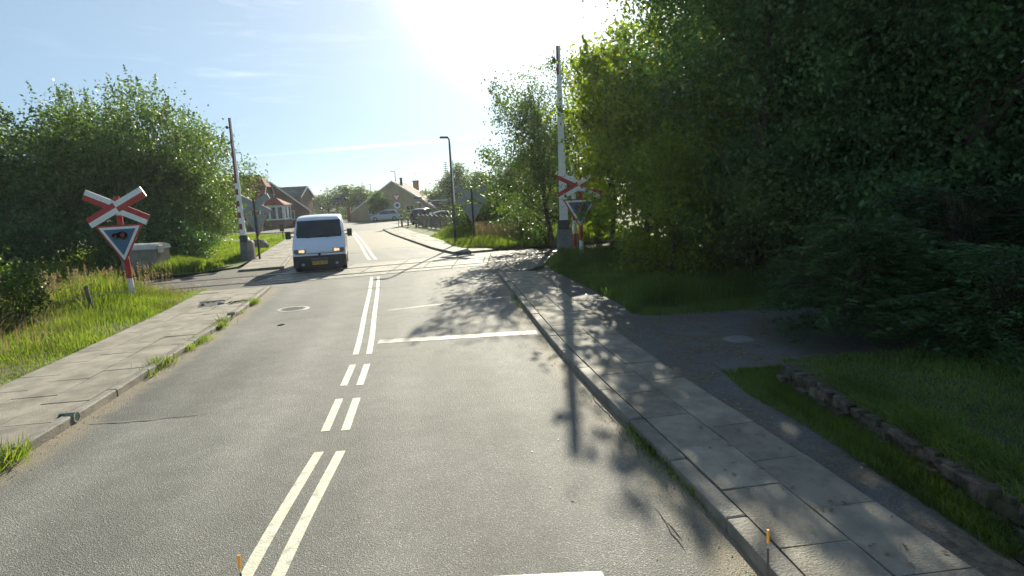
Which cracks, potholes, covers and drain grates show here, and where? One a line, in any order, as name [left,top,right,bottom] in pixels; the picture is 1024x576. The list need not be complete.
manhole cover [723,335,755,343]
crack [654,507,685,550]
